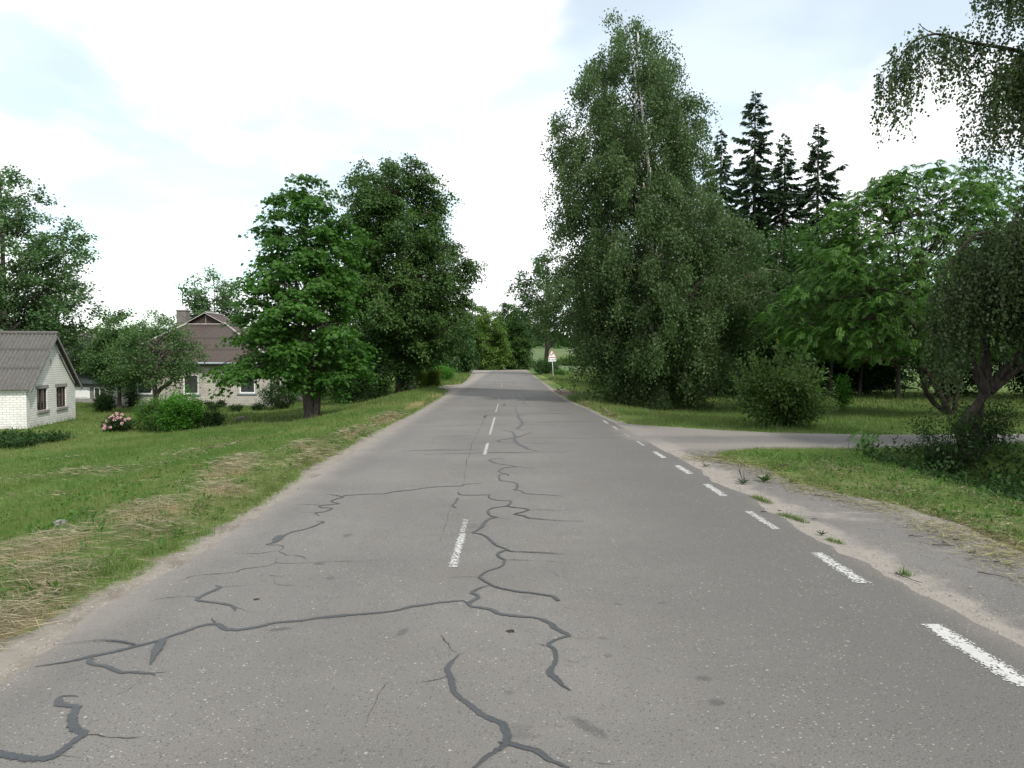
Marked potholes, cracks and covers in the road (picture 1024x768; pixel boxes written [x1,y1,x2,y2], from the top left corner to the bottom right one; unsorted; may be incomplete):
crack [432,425,540,454]
